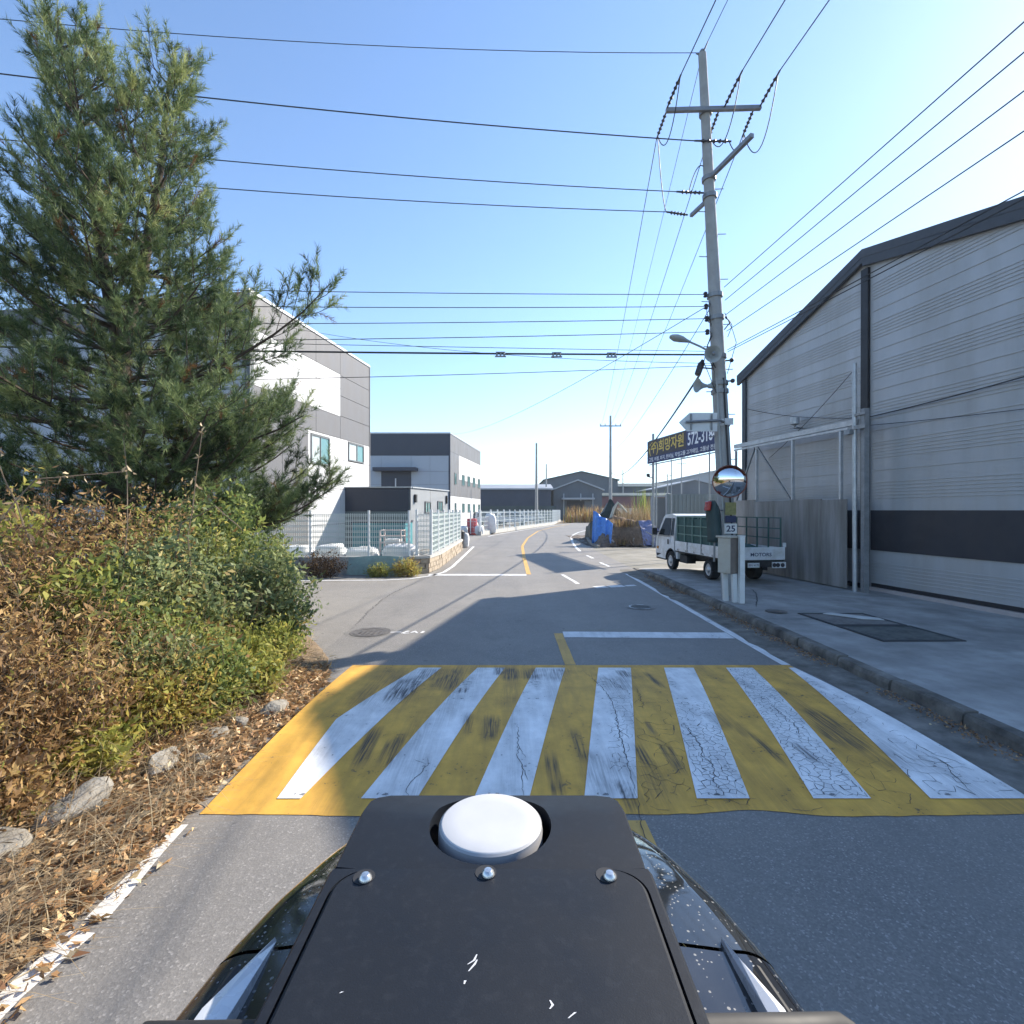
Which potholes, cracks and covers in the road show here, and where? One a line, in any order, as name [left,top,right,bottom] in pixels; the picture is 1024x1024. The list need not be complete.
crack [516,724,528,794]
manhole cover [344,627,396,638]
crack [587,669,1010,839]
